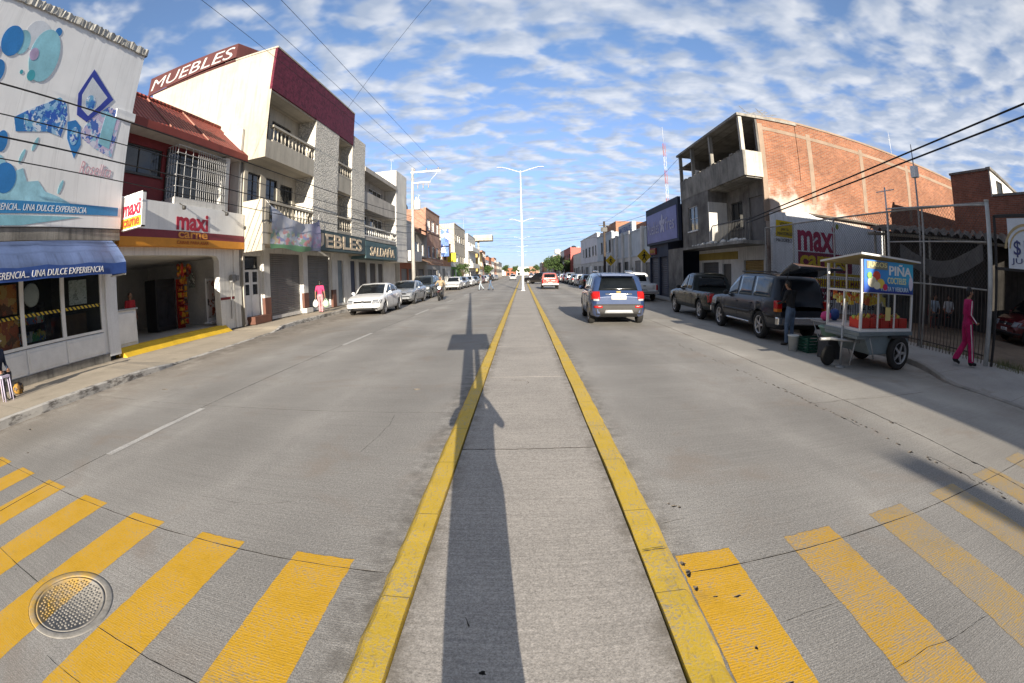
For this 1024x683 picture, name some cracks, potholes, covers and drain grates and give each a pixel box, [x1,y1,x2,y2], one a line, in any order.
manhole cover [29,572,113,639]
crack [893,616,985,670]
